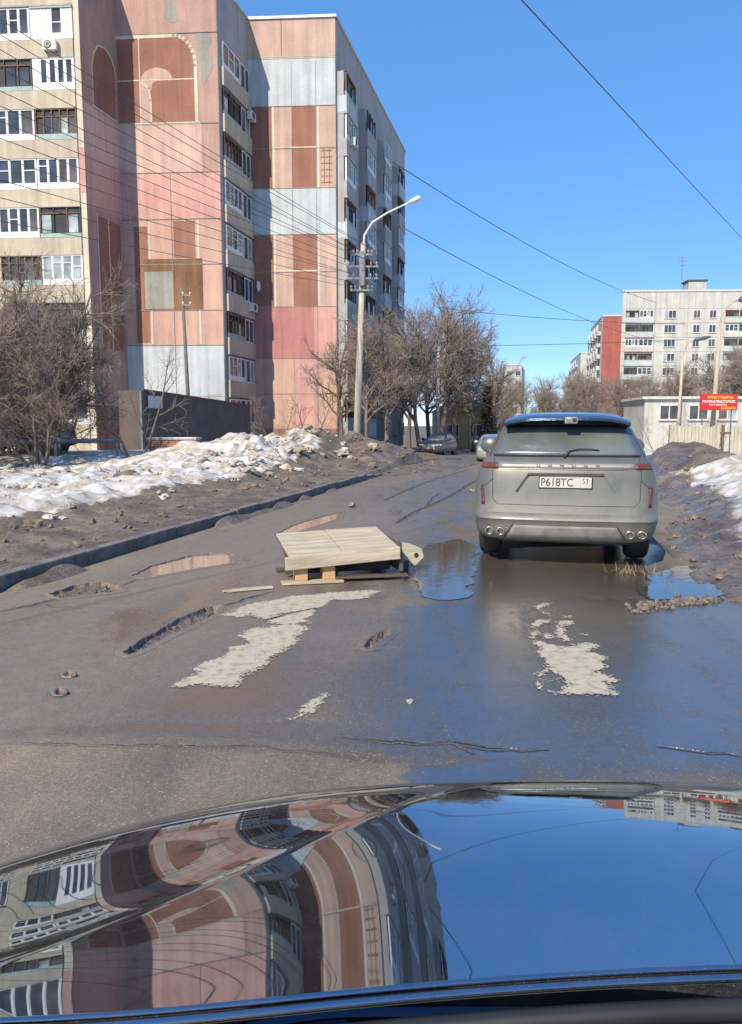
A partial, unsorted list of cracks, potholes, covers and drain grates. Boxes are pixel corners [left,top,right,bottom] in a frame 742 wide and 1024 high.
pothole [51,686,68,697]
crack [656,745,742,757]
pothole [113,604,226,659]
pothole [125,553,239,580]
pothole [355,626,399,652]
crack [342,735,550,753]
pothole [270,511,346,537]
pothole [43,581,129,600]
crack [383,470,477,523]
